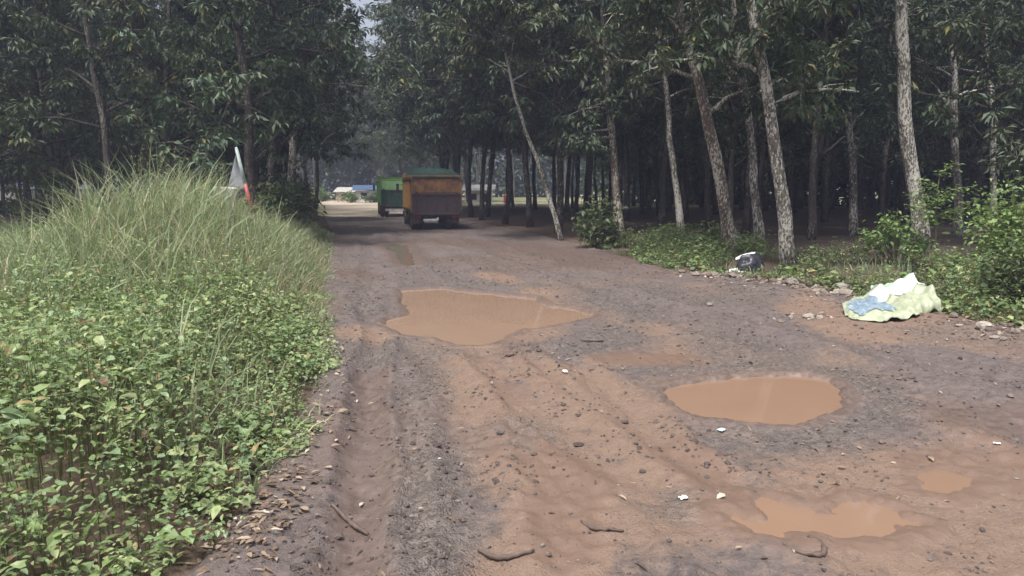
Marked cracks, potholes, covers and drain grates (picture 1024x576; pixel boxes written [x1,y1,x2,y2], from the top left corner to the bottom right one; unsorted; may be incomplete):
pothole [677,486,958,564]
pothole [647,368,872,433]
pothole [366,285,608,349]
